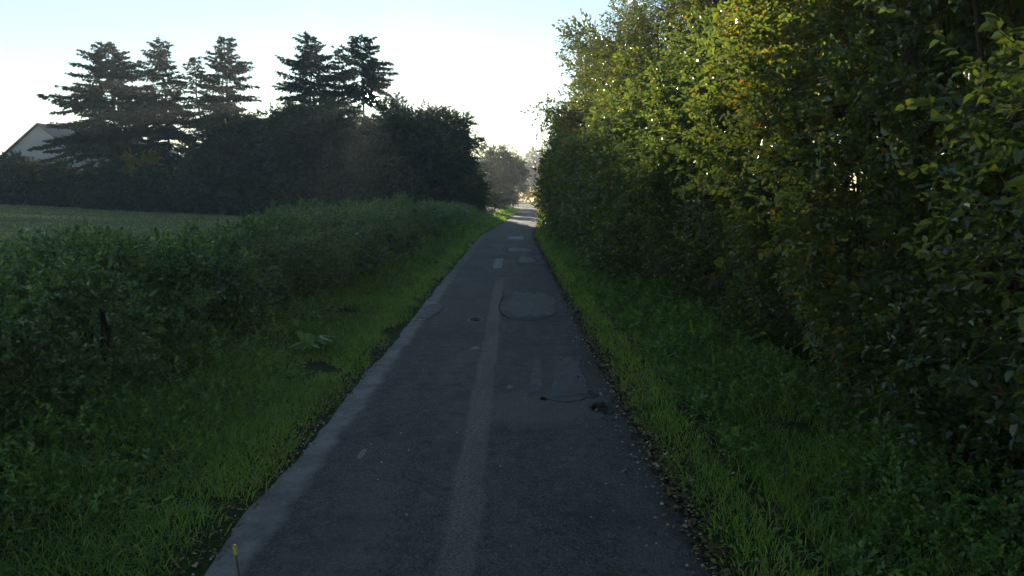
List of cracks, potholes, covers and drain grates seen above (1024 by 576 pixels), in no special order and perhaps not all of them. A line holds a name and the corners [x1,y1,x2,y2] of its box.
pothole [587,401,614,416]
